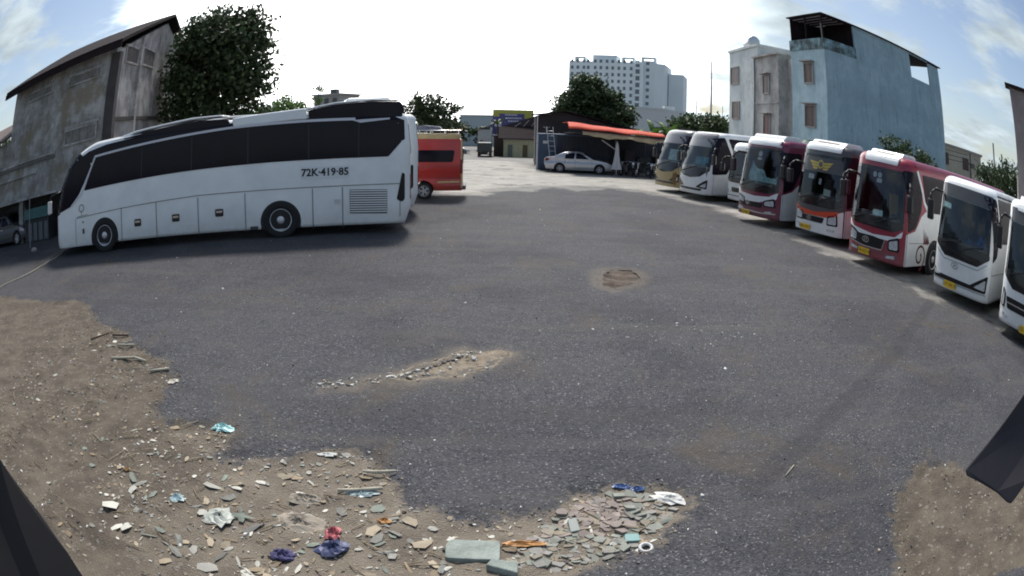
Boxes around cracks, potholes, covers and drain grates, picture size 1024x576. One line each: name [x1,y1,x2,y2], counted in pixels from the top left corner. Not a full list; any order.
pothole [389,350,513,382]
pothole [594,268,647,290]
